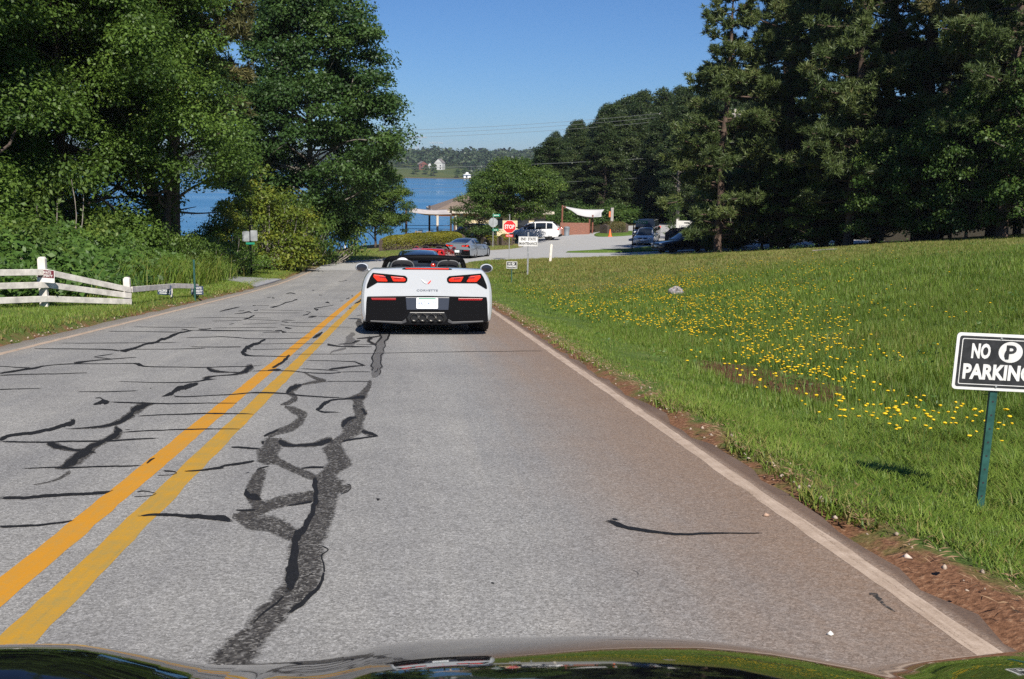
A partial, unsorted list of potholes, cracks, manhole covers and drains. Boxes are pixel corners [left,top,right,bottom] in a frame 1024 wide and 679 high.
crack [0,280,479,432]
crack [1,490,156,499]
crack [869,593,896,612]
crack [1,520,72,528]
